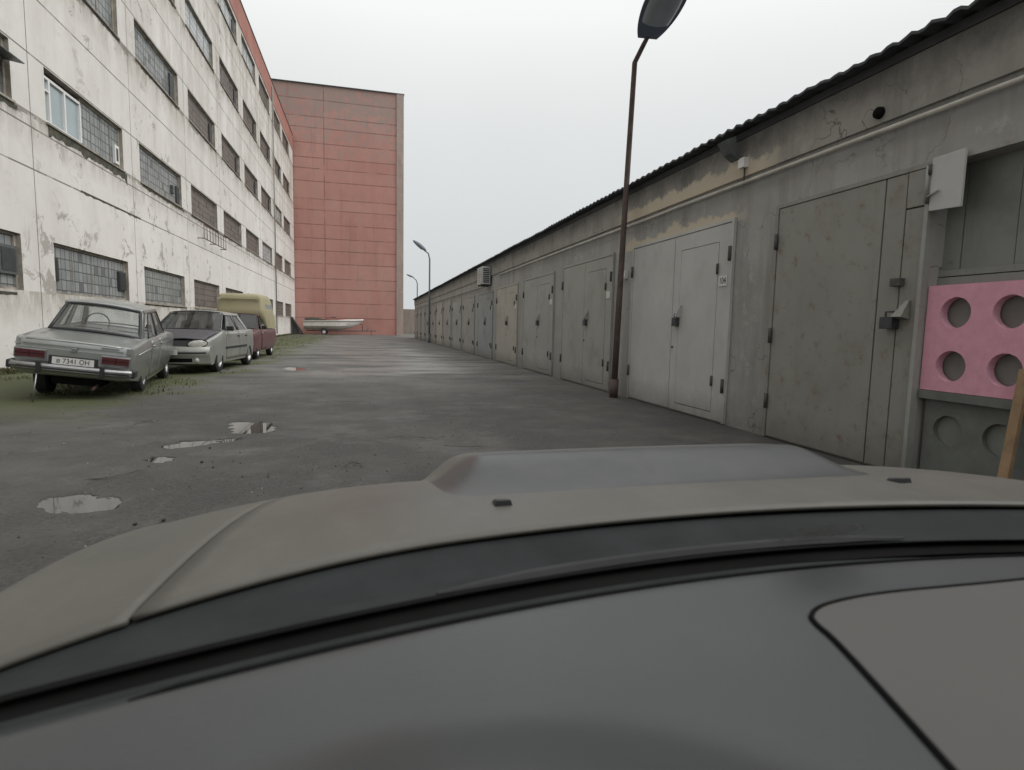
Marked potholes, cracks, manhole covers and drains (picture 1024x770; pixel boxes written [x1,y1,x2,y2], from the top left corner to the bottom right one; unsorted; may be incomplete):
pothole [341,462,364,471]
pothole [155,437,251,450]
pothole [227,421,278,434]
pothole [34,493,123,514]
